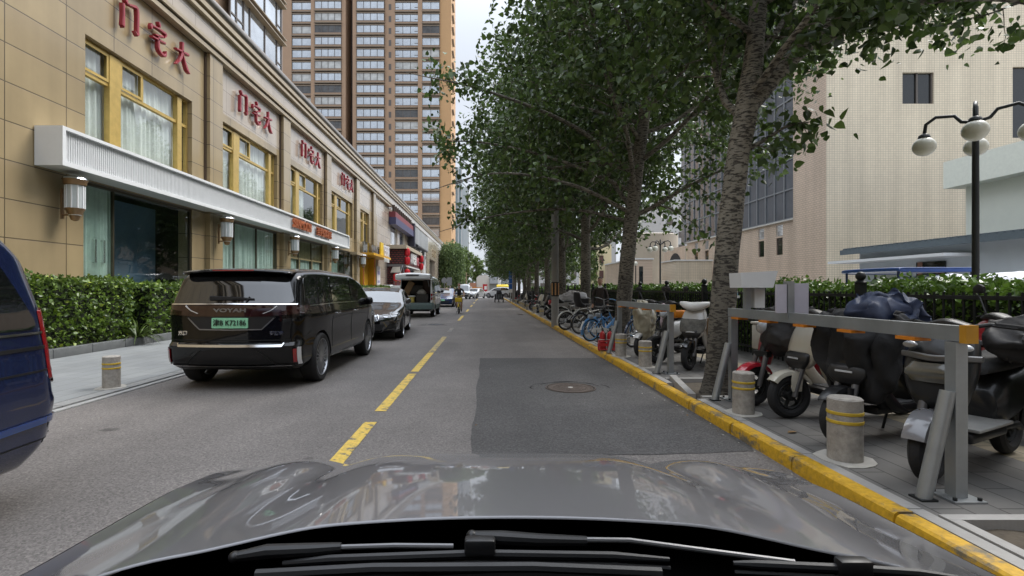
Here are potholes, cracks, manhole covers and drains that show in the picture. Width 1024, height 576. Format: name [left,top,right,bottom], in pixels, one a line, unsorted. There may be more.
manhole cover [545,383,596,393]
